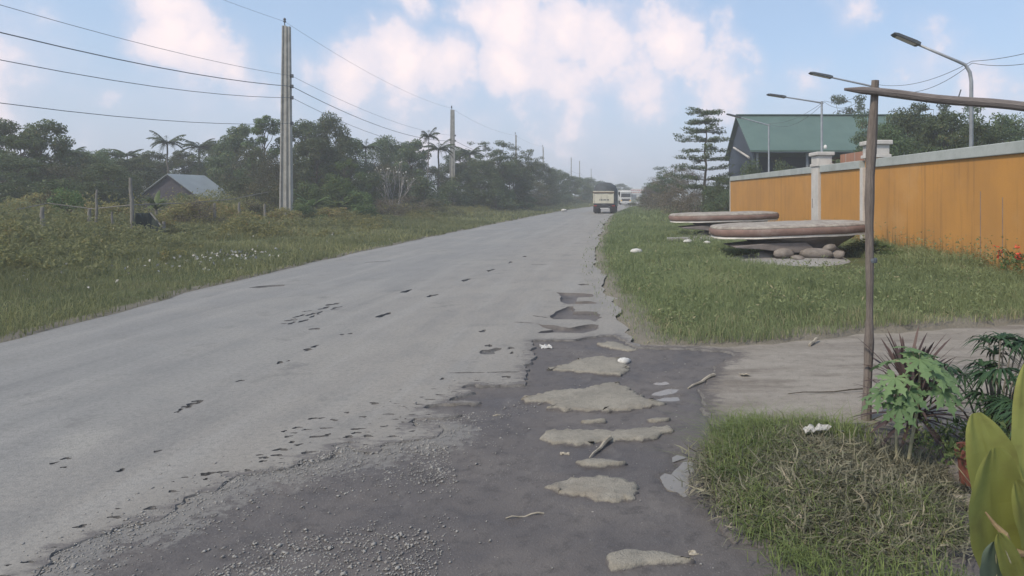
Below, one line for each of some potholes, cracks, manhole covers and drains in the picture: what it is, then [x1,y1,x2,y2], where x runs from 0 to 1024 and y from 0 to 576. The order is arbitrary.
pothole [556,292,596,304]
pothole [550,306,602,322]
pothole [0,335,980,576]
pothole [537,323,599,333]
